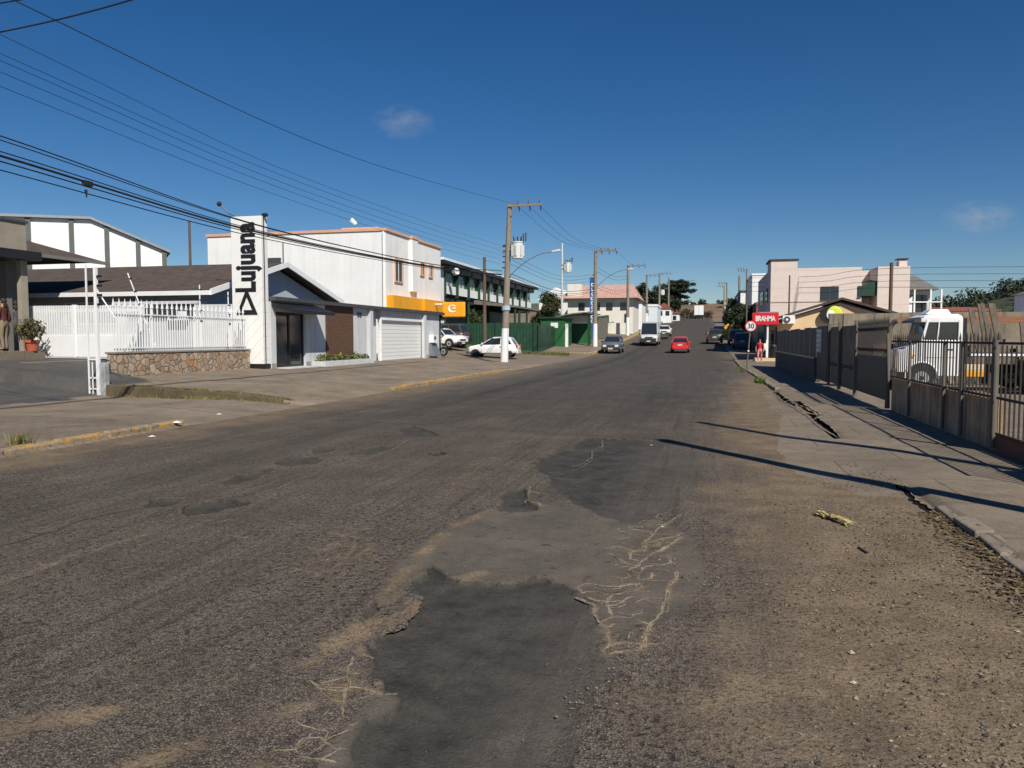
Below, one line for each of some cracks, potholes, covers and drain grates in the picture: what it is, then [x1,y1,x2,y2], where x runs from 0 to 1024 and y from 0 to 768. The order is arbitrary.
crack [772,392,840,439]
pothole [131,496,197,510]
crack [894,484,942,520]
pothole [393,425,447,438]
pothole [212,466,284,487]
pothole [484,487,550,515]
pothole [264,455,332,468]
pothole [310,561,647,768]
pothole [303,445,344,455]
pothole [168,496,264,520]
